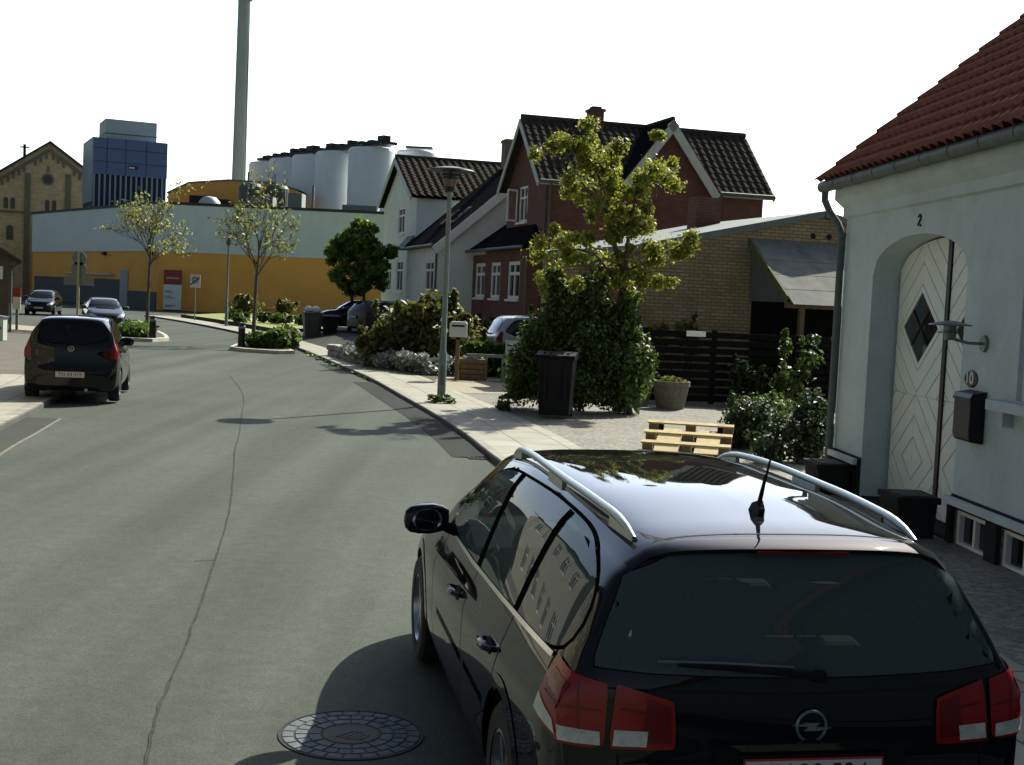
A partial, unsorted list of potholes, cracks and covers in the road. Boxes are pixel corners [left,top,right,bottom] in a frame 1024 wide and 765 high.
manhole cover [277,710,424,761]
crack [144,377,245,765]
